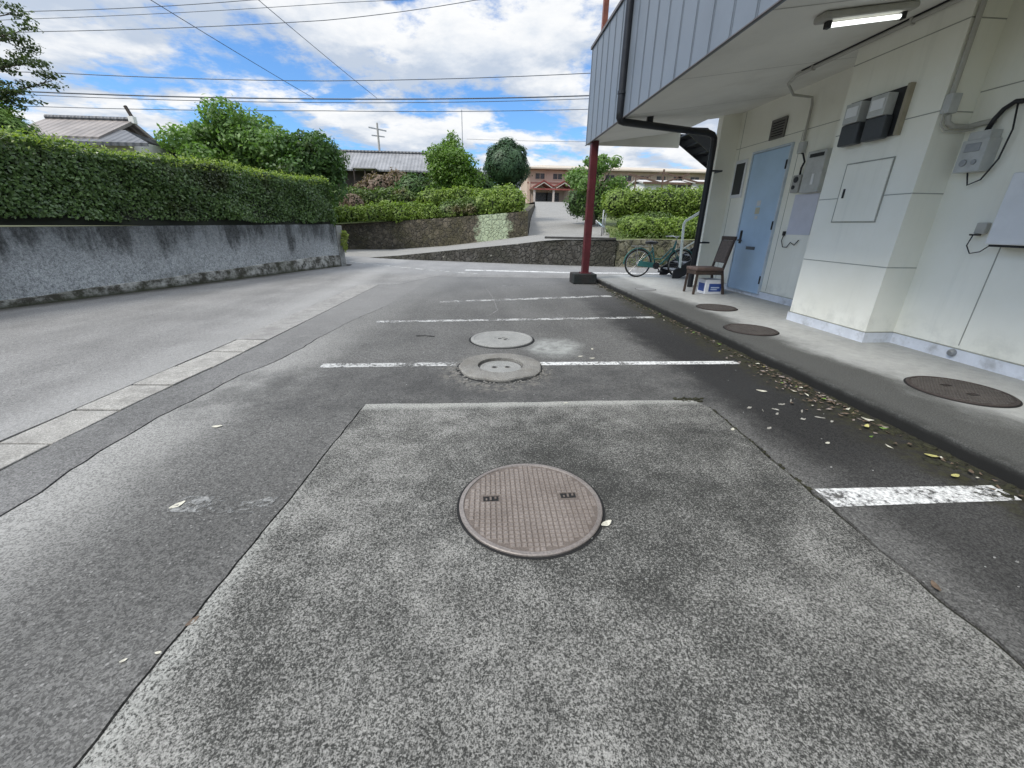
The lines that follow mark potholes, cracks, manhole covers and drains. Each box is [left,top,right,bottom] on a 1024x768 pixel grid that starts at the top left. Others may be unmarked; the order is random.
manhole cover [903,376,1023,408]
manhole cover [469,331,535,349]
manhole cover [723,324,780,336]
manhole cover [457,464,605,560]
manhole cover [456,353,542,383]
